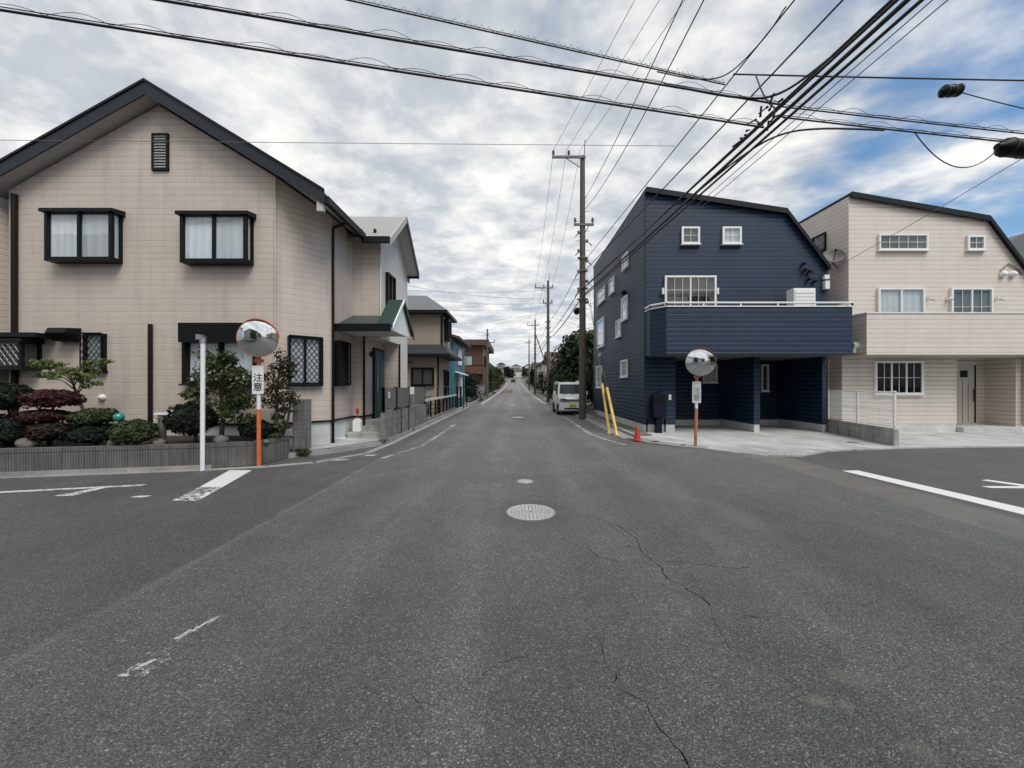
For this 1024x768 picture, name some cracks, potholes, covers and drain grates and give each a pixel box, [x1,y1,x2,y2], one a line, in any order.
manhole cover [505,504,557,521]
crack [597,638,690,768]
crack [579,513,901,735]
